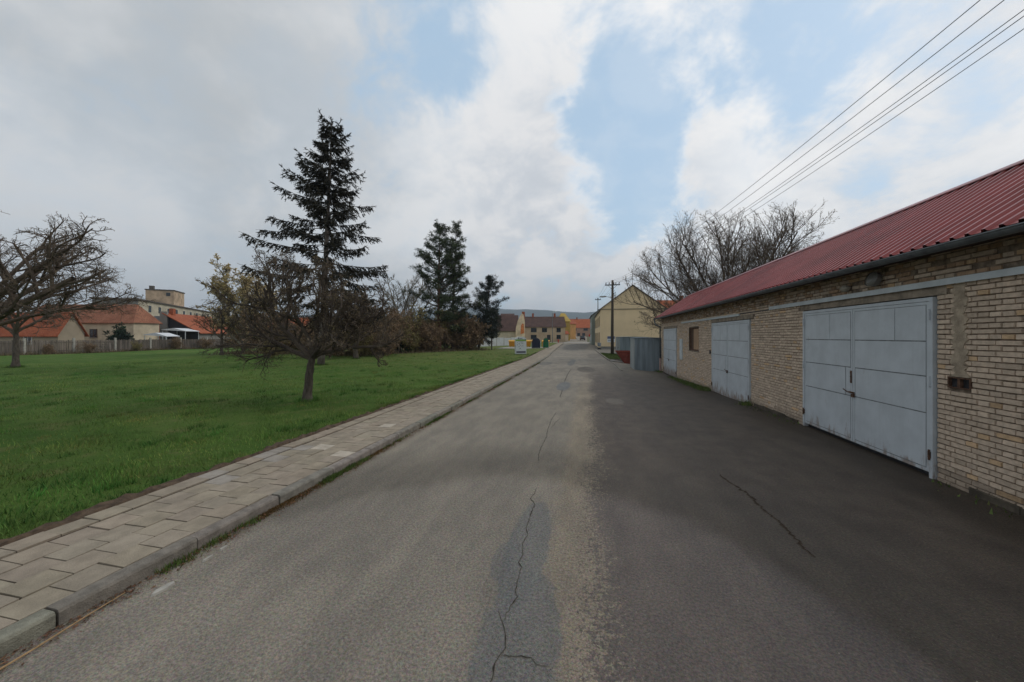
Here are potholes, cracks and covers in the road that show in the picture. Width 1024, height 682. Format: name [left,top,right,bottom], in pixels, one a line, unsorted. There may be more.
crack [538,371,570,461]
crack [490,487,550,682]
